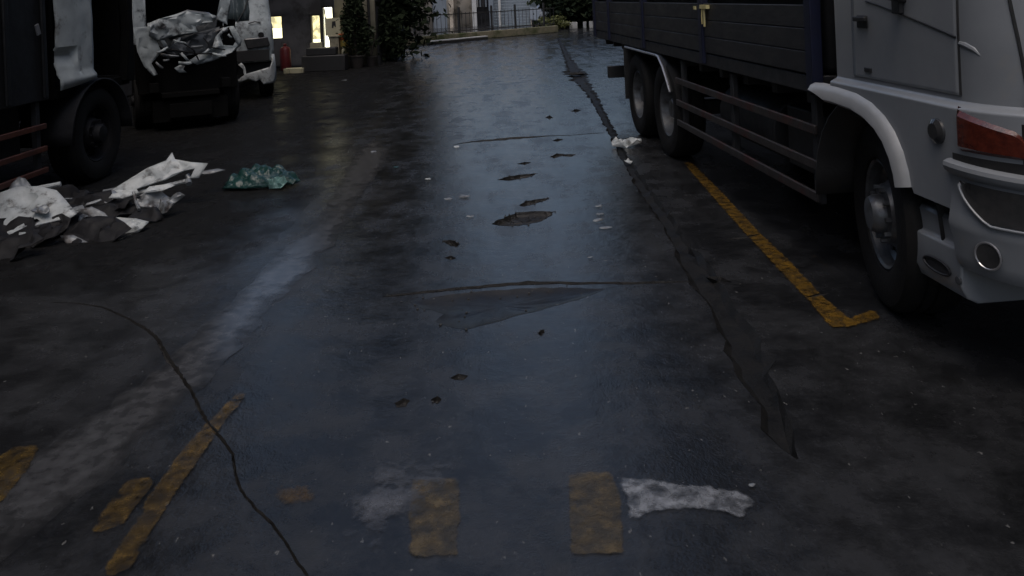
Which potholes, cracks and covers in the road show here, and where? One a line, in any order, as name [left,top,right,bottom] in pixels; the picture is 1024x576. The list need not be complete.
pothole [498,173,537,181]
pothole [492,211,556,227]
pothole [519,197,549,207]
crack [51,302,309,576]
